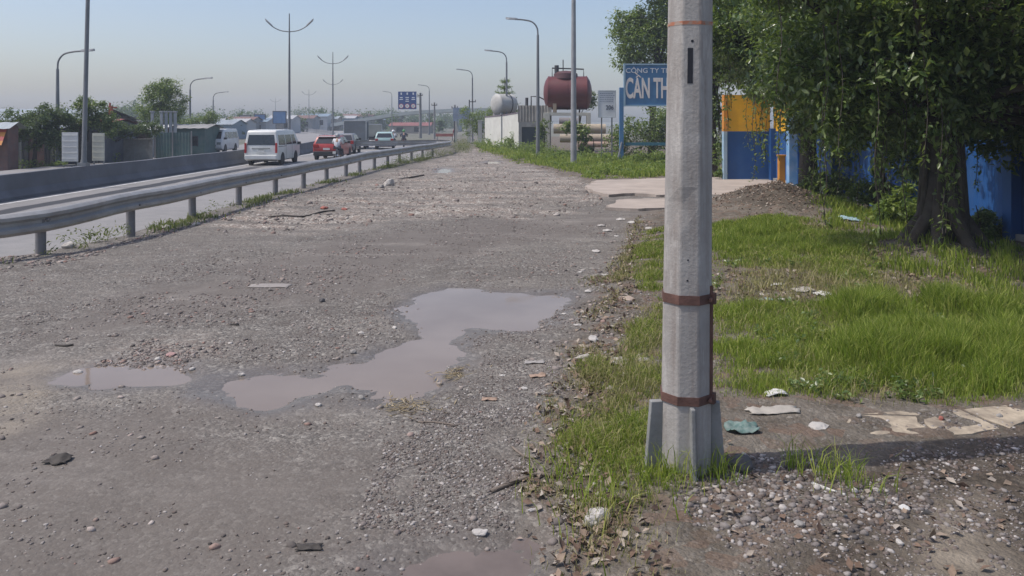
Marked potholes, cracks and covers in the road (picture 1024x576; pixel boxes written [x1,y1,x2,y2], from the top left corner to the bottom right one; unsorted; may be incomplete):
pothole [27,356,207,392]
pothole [178,284,595,414]
pothole [349,518,589,576]
